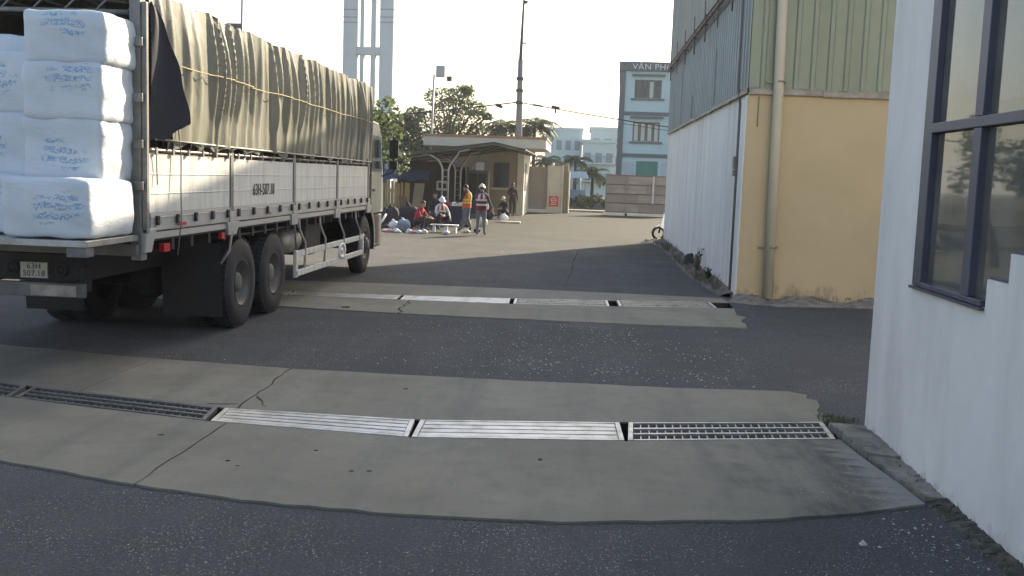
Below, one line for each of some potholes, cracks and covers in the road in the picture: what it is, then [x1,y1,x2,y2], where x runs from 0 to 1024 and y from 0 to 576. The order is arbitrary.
drain grate [617,300,717,308]
drain grate [513,298,609,306]
drain grate [14,386,218,421]
drain grate [210,408,415,437]
drain grate [0,382,26,397]
drain grate [628,421,835,441]
drain grate [411,419,625,441]
drain grate [400,295,510,304]
